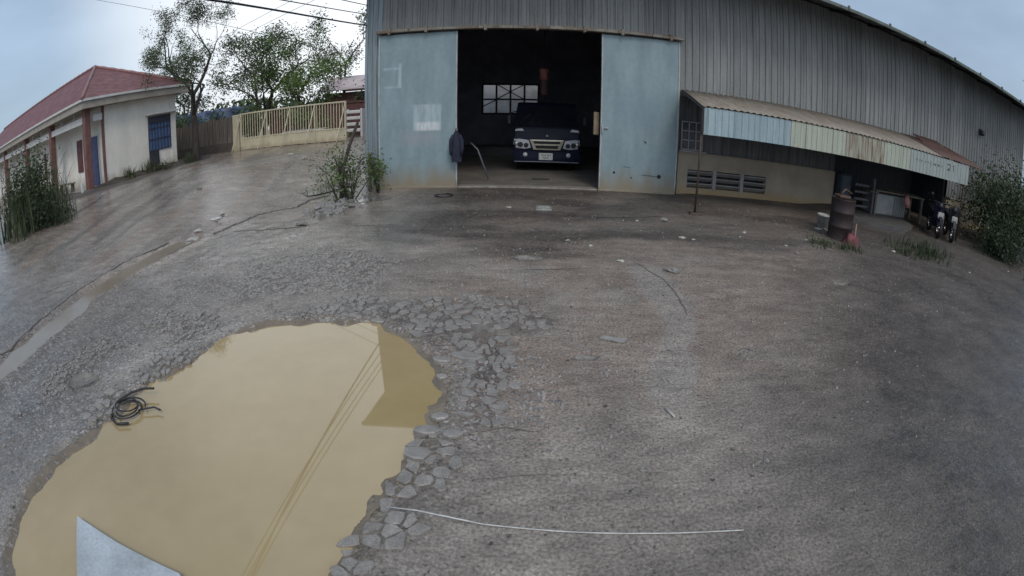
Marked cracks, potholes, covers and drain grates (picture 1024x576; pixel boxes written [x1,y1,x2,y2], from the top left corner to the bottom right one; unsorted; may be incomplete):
crack [635,262,687,314]
crack [0,195,569,576]
pothole [2,318,447,576]
